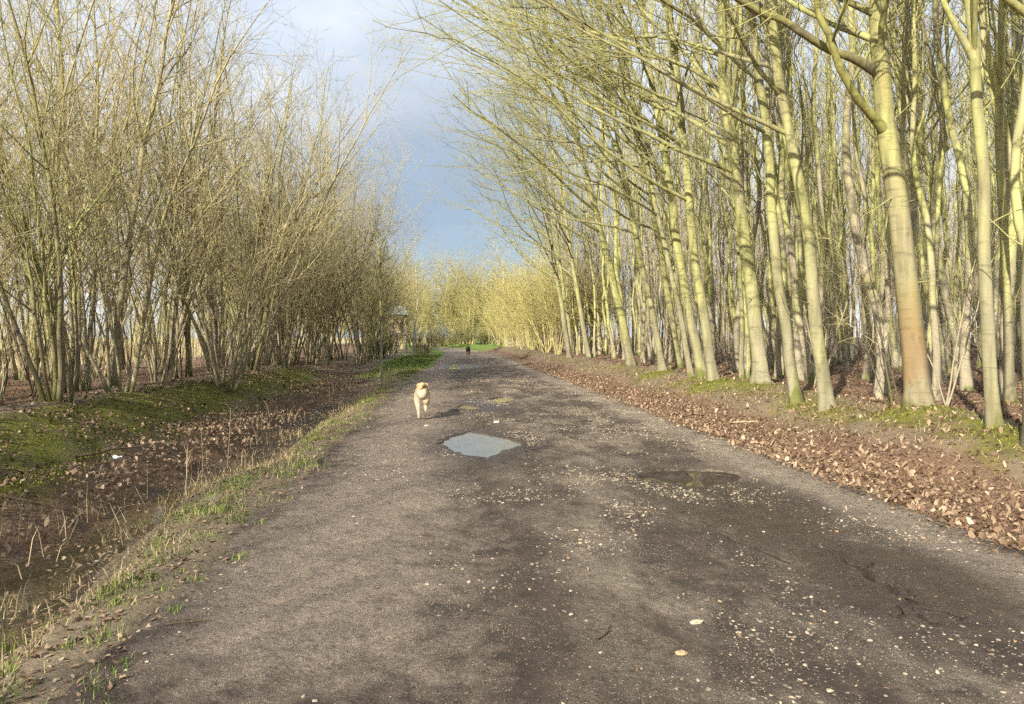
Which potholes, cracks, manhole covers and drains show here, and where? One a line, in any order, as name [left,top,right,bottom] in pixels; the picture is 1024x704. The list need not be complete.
pothole [631,468,750,489]
crack [819,553,967,625]
pothole [433,430,530,460]
